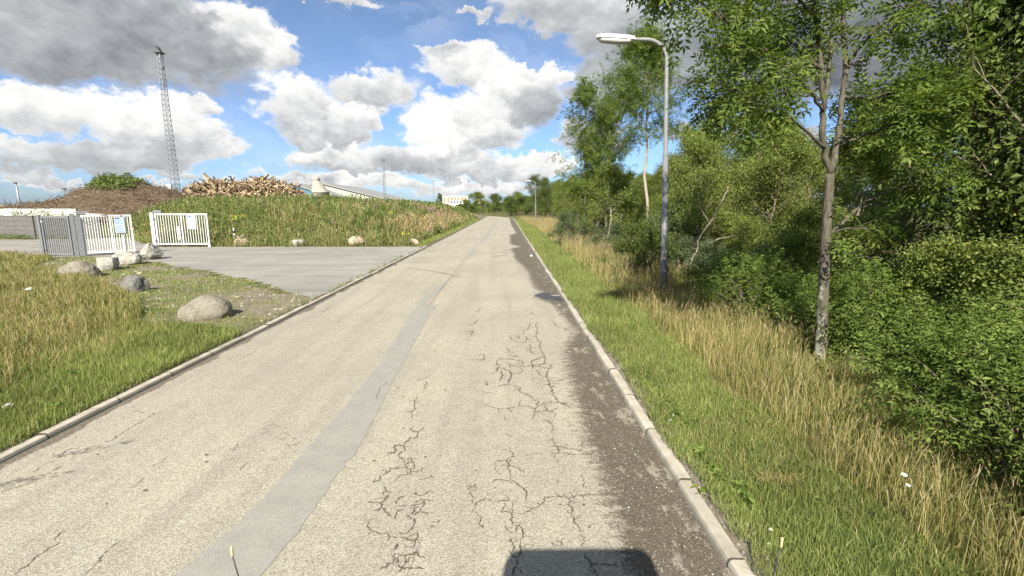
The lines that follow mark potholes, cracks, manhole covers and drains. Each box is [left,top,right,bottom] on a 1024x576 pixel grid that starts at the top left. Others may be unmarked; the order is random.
crack [366,375,440,572]
crack [2,411,154,492]
crack [466,308,618,576]
